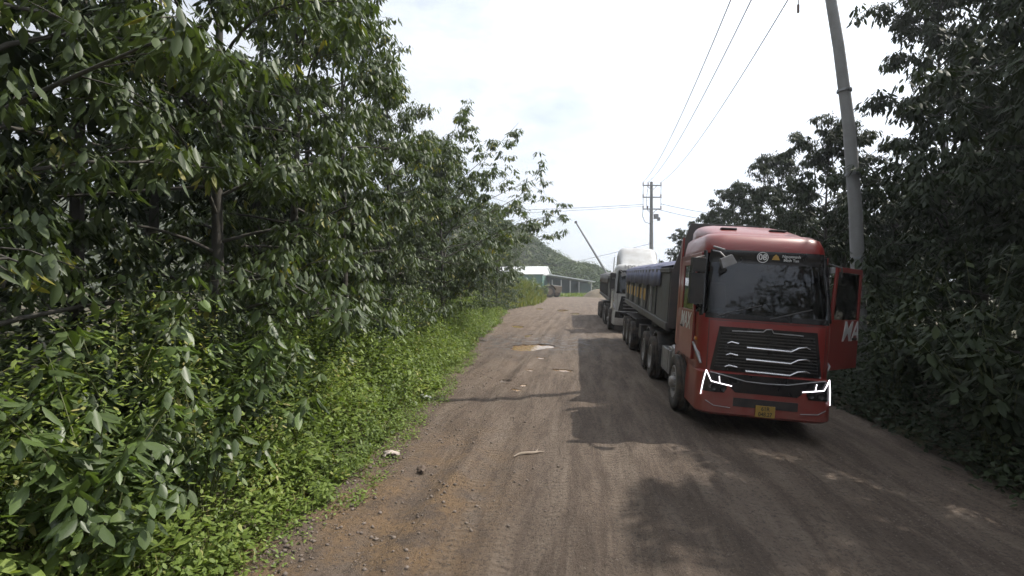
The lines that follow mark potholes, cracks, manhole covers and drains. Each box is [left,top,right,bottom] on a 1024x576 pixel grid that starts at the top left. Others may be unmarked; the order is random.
pothole [505,343,560,352]
